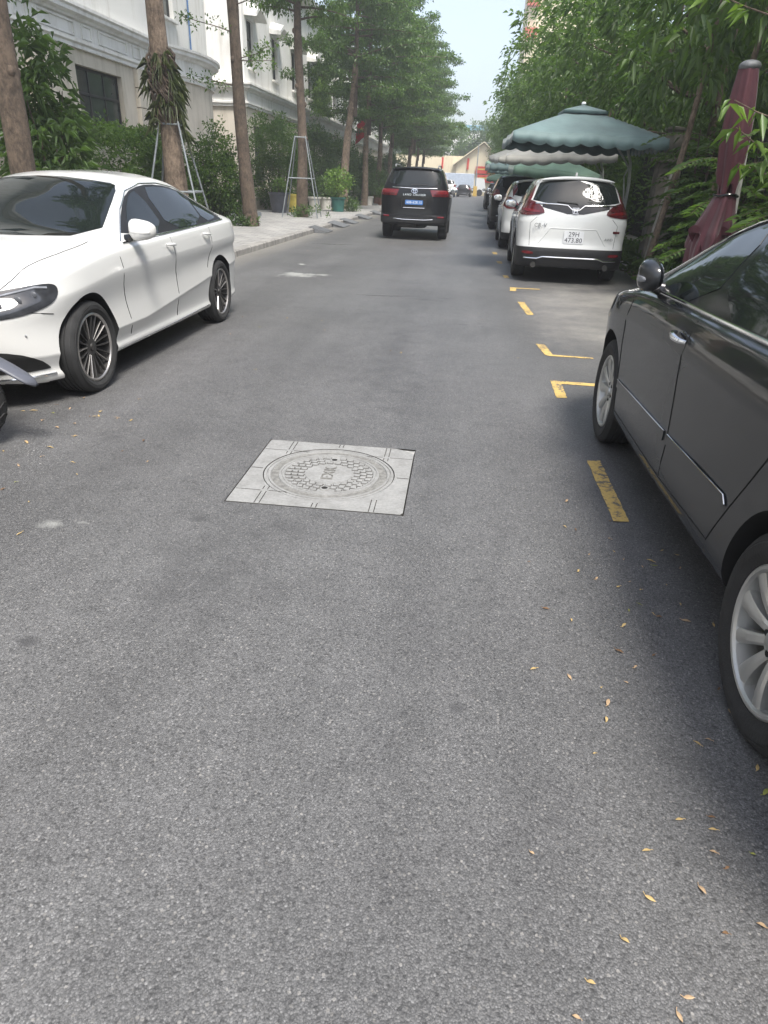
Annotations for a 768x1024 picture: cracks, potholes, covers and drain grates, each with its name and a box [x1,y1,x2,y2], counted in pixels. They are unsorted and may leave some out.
manhole cover [225,440,415,516]
